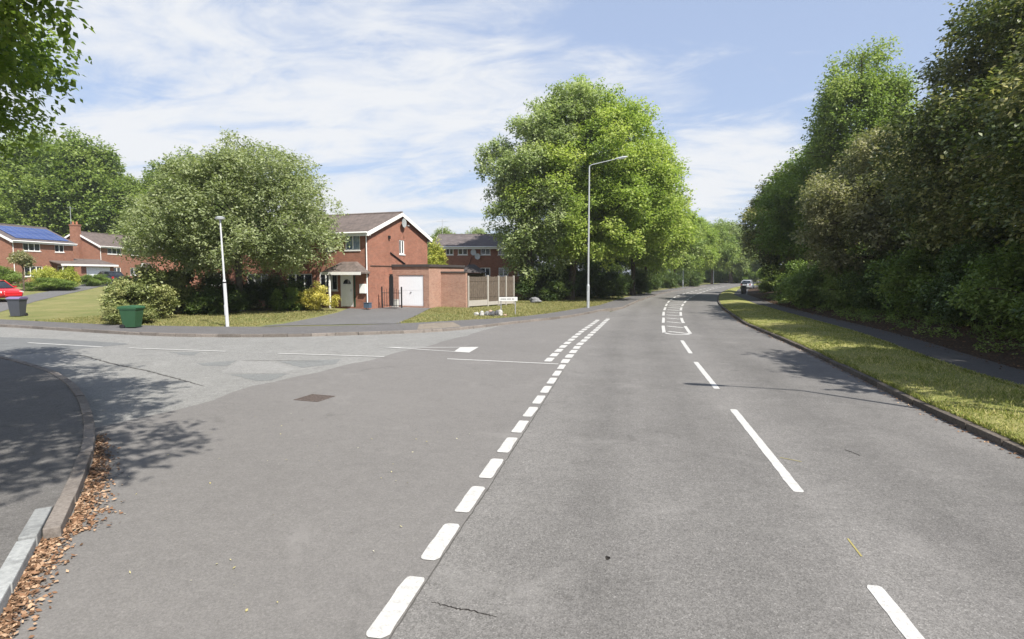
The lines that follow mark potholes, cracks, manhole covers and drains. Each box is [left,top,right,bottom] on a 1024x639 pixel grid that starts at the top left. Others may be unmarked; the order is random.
crack [435,602,496,617]
manhole cover [294,394,334,402]
